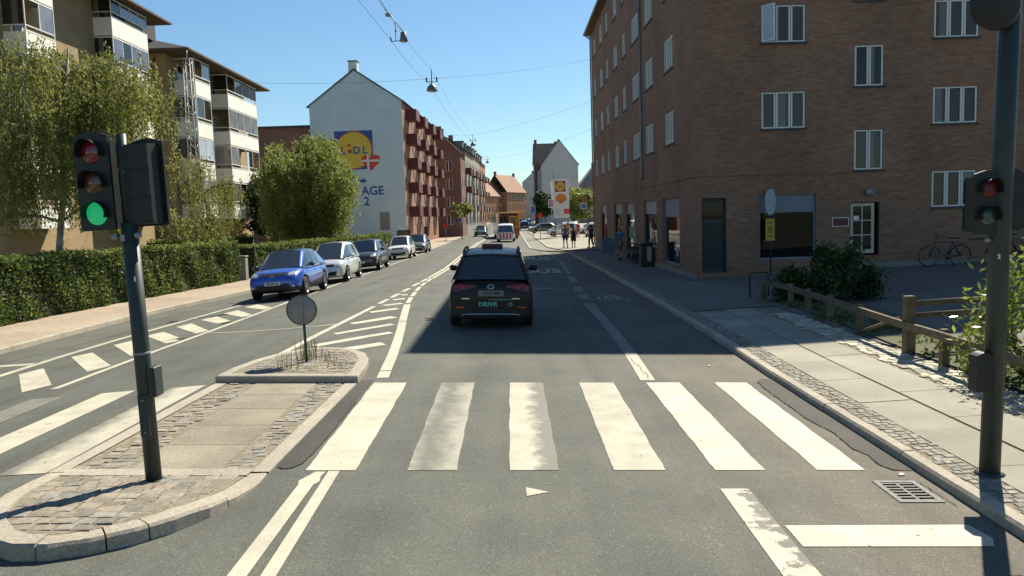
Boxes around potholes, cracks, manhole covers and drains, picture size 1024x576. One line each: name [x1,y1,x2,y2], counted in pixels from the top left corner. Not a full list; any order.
drain grate [872,480,946,503]
